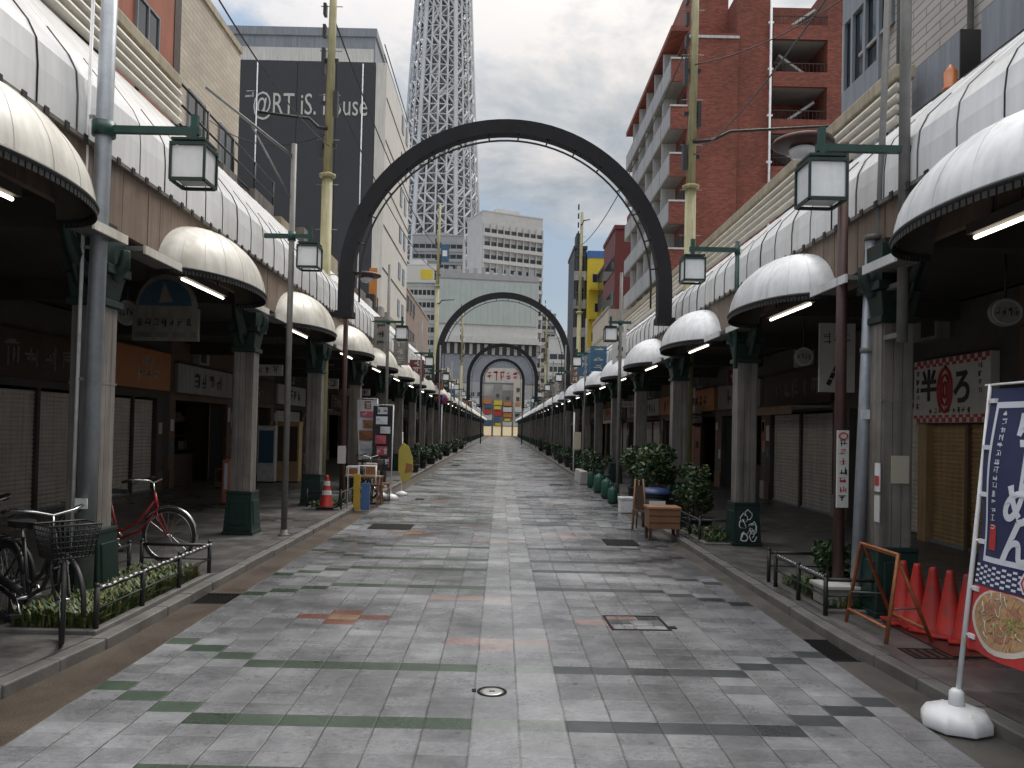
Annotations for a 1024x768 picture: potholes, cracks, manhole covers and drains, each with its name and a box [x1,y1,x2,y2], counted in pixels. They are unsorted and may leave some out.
manhole cover [602,615,677,631]
drain grate [190,593,241,604]
drain grate [803,639,861,662]
manhole cover [472,686,507,697]
